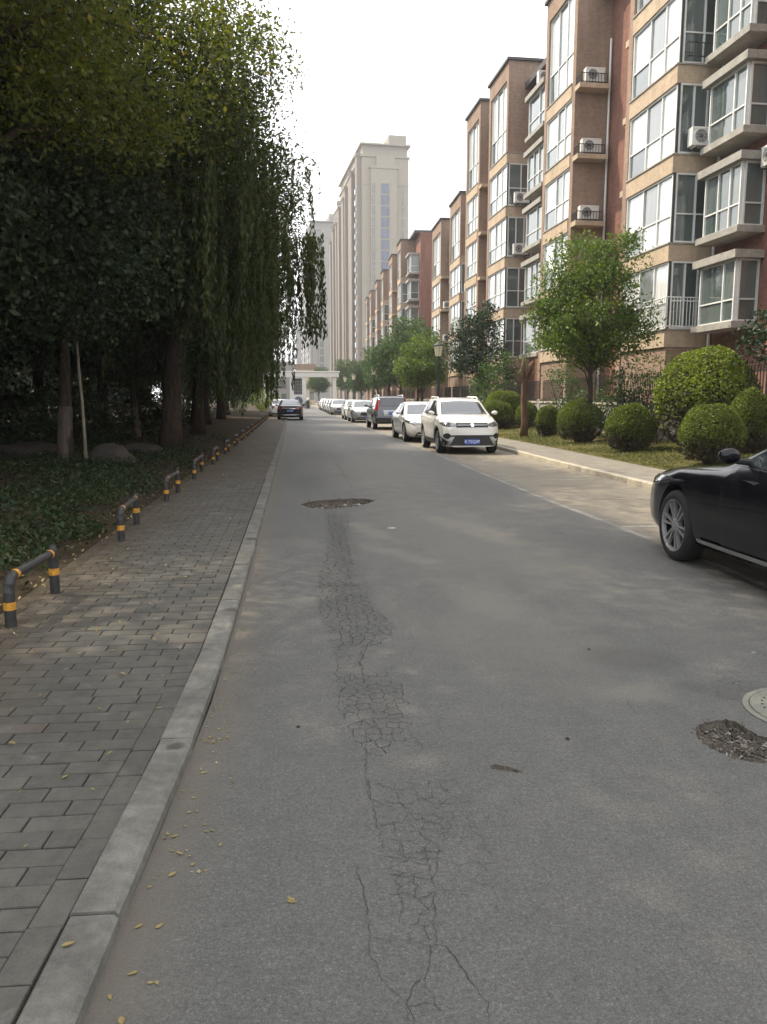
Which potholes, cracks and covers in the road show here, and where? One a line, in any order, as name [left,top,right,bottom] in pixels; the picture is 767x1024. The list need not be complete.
crack [315,510,423,793]
pothole [690,718,767,764]
crack [356,780,496,1024]
pothole [297,498,375,509]
manhole cover [742,688,767,723]
